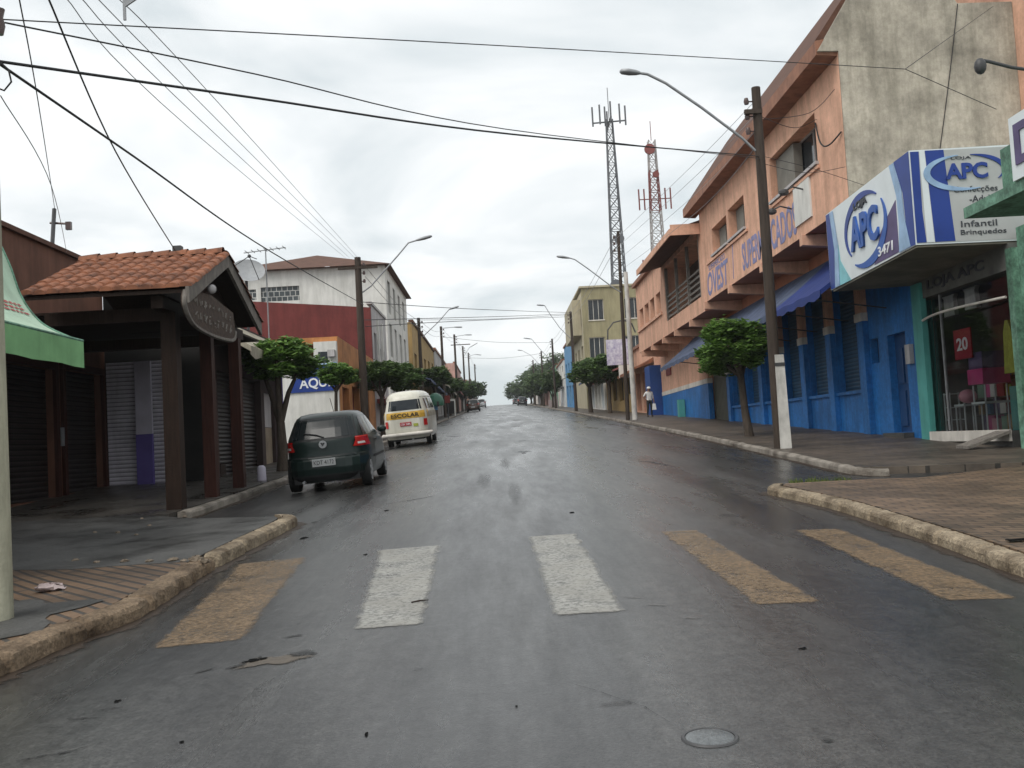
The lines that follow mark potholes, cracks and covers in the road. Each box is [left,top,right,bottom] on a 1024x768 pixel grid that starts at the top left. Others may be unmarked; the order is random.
manhole cover [681,727,739,748]
pothole [226,650,316,669]
